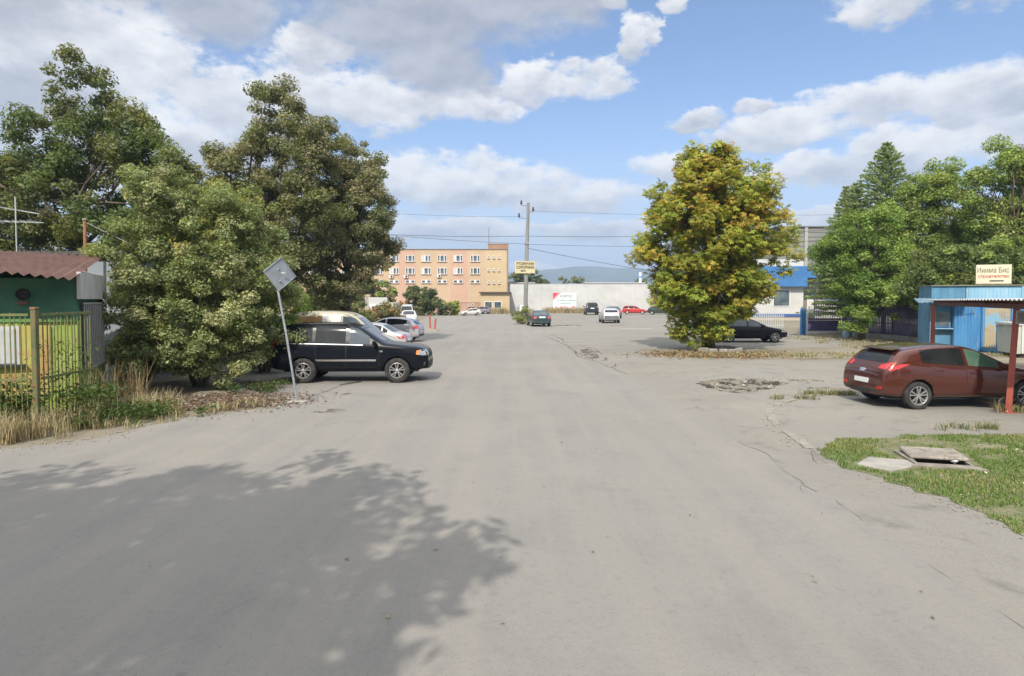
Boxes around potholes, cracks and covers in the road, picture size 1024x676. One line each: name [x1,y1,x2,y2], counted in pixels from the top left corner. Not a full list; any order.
manhole cover [893,446,989,472]
pothole [695,378,794,393]
pothole [580,349,599,359]
crack [738,440,861,519]
